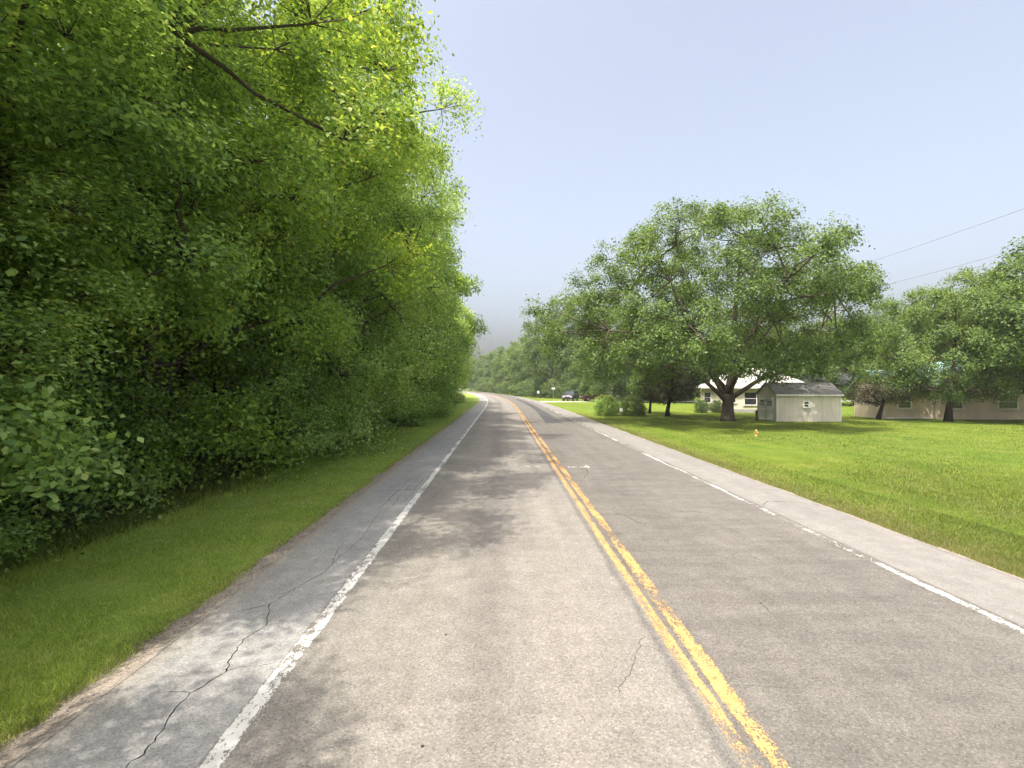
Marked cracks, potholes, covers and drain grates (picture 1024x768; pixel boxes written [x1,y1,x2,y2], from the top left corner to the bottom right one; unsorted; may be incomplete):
crack [126,515,378,768]
